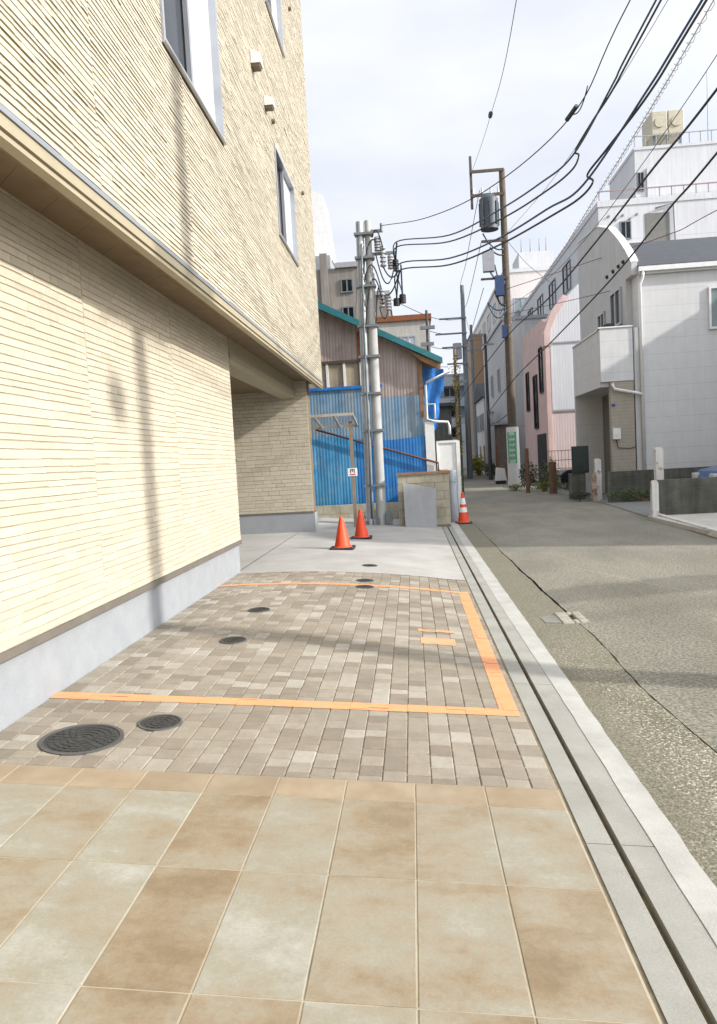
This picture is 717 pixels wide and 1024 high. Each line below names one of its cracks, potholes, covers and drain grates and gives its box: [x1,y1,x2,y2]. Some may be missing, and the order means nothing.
manhole cover [220,636,247,644]
crack [475,524,717,753]
manhole cover [138,714,183,731]
manhole cover [541,611,589,624]
manhole cover [38,723,124,756]
